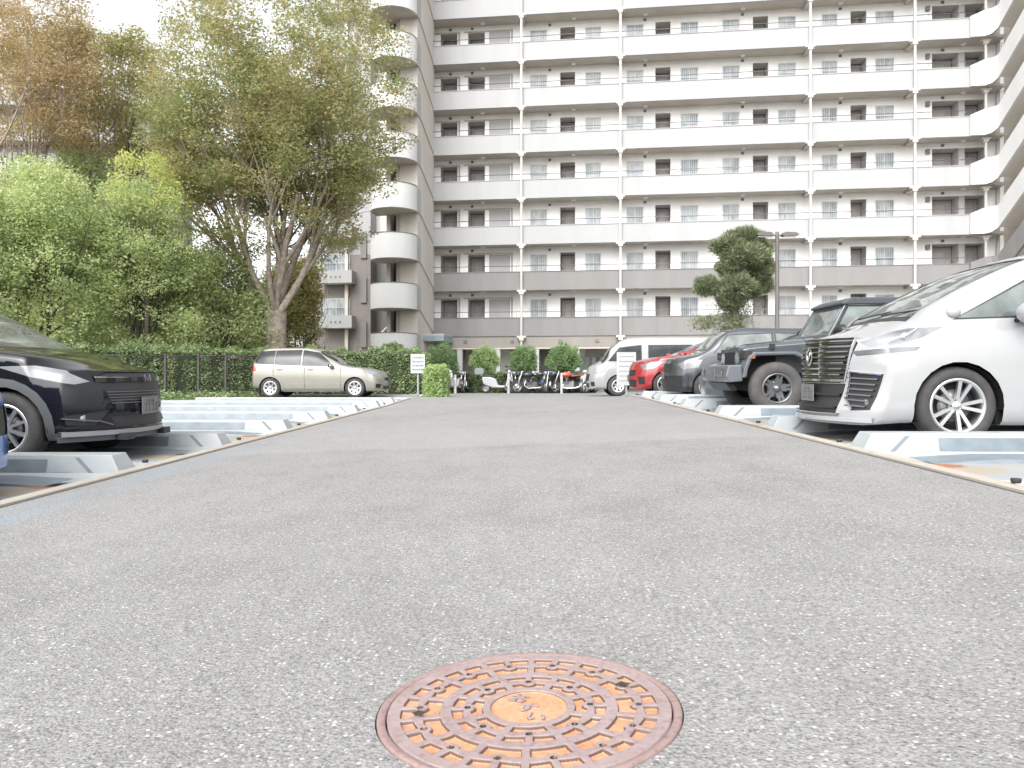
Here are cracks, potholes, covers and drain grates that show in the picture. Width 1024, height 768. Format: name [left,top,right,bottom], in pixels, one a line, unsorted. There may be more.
manhole cover [376,652,683,768]
